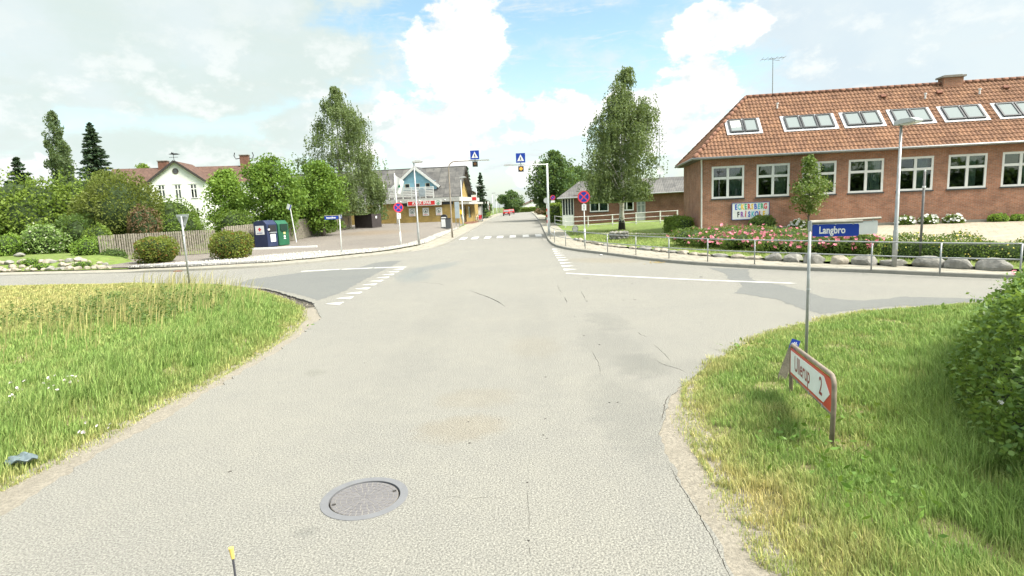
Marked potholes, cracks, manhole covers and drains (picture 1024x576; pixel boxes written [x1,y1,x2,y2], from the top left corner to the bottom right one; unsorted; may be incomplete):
manhole cover [320,477,408,521]
